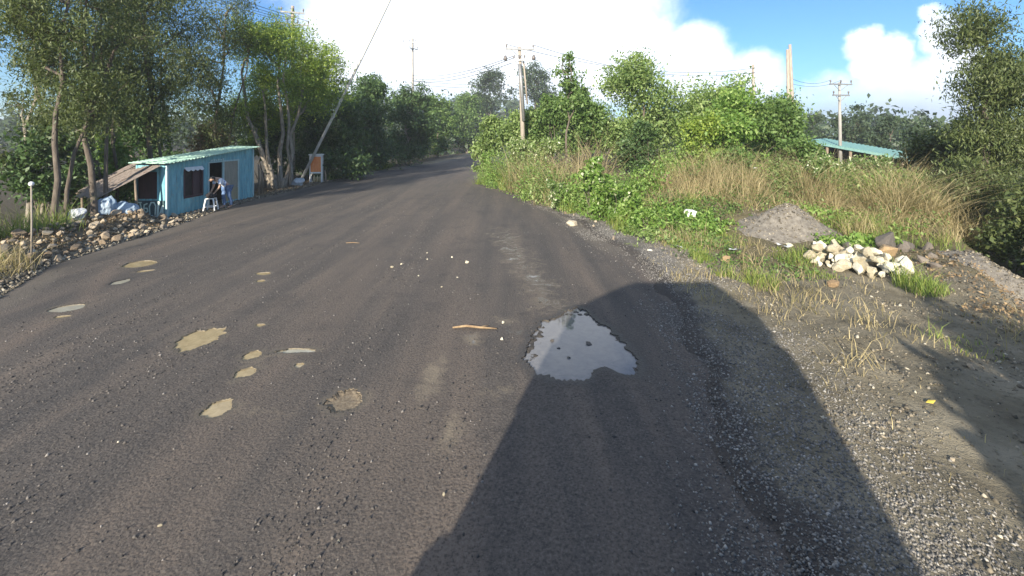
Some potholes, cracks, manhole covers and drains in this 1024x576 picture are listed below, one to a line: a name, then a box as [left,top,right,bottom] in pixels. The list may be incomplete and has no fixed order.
pothole [323,388,362,414]
pothole [521,306,639,381]
